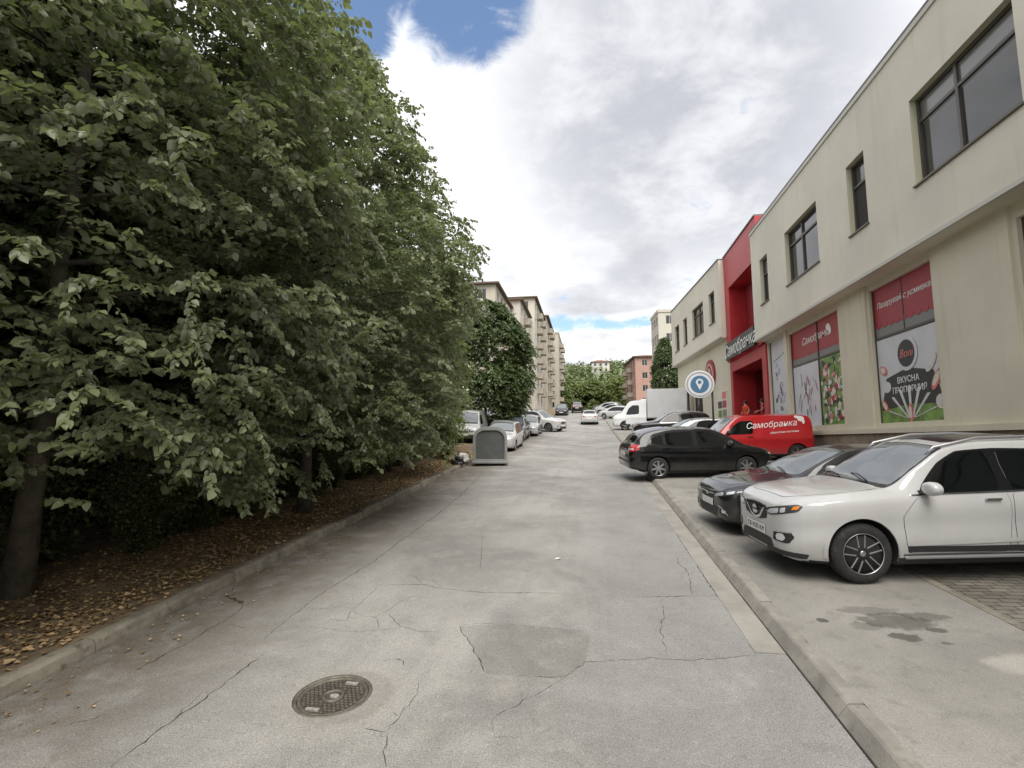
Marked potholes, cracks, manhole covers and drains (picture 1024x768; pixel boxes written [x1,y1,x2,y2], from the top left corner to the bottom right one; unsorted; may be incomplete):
manhole cover [292,675,372,718]
crack [111,478,562,767]
crack [492,540,782,737]
